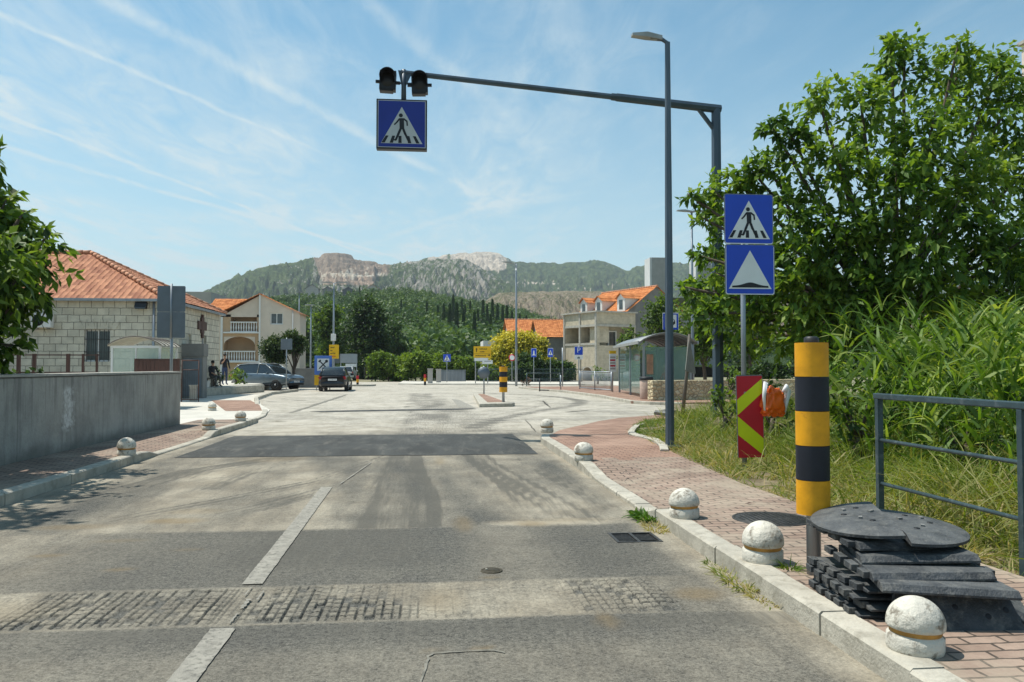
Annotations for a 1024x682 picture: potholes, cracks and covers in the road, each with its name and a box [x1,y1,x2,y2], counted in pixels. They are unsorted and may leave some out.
drain grate [608,532,663,543]
crack [420,649,503,682]
manhole cover [732,511,806,527]
